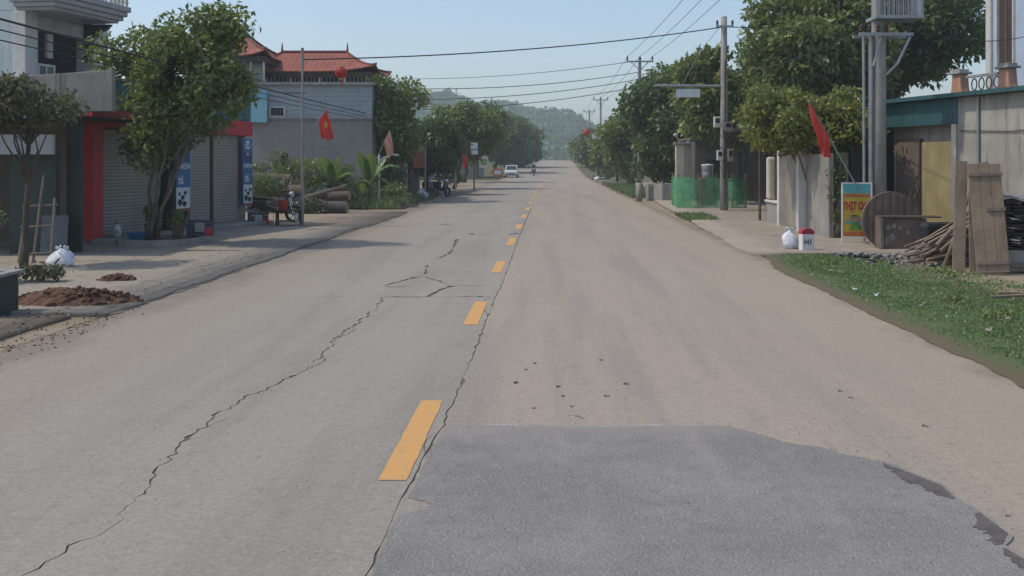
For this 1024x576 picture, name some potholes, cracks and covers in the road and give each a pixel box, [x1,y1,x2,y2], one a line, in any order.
crack [22,233,486,576]
